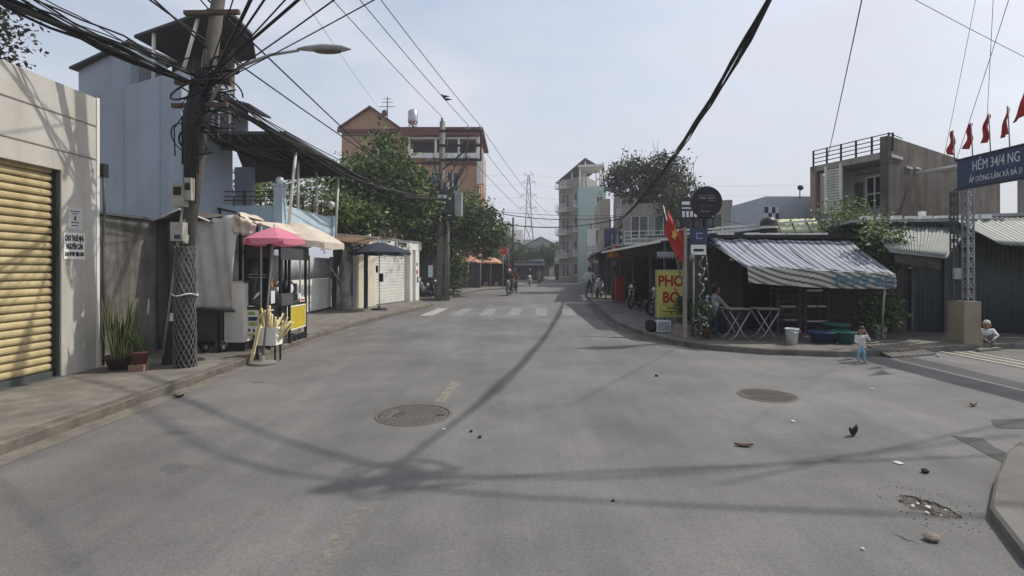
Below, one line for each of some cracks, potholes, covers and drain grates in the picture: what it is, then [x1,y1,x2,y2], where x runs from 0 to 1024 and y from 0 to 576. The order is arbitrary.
pothole [878,486,994,532]
manhole cover [736,388,800,403]
manhole cover [374,404,453,427]
